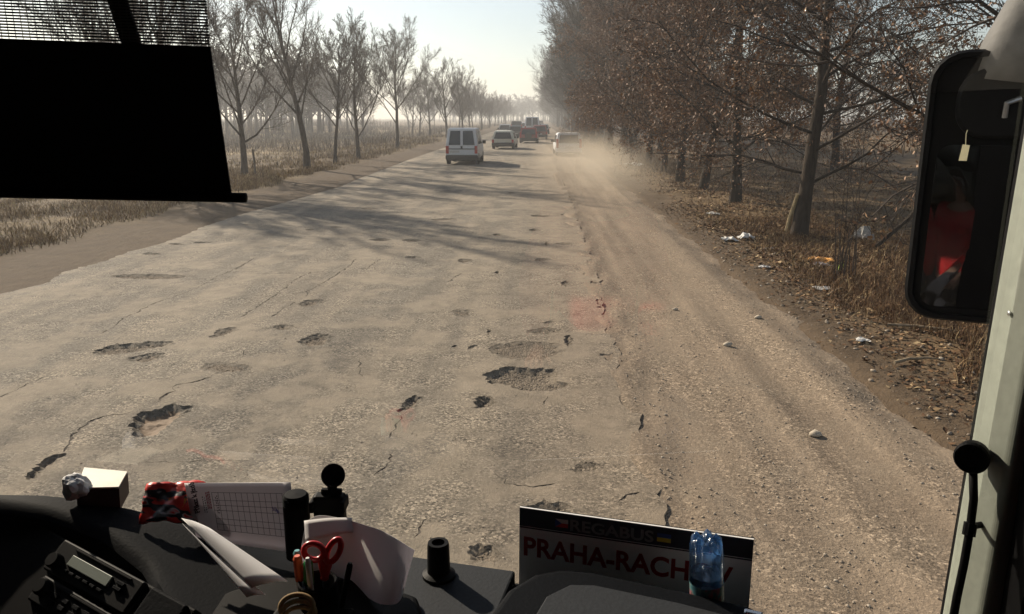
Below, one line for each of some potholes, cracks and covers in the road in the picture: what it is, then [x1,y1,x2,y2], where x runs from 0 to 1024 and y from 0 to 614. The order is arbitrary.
pothole [297,333,335,347]
pothole [473,396,496,408]
pothole [467,543,503,563]
pothole [482,366,570,391]
pothole [488,341,565,362]
pothole [526,327,561,335]
pothole [128,352,166,363]
pothole [209,327,239,338]
pothole [128,402,194,438]
pothole [200,361,252,374]
pothole [92,341,176,356]
crack [63,377,210,452]
